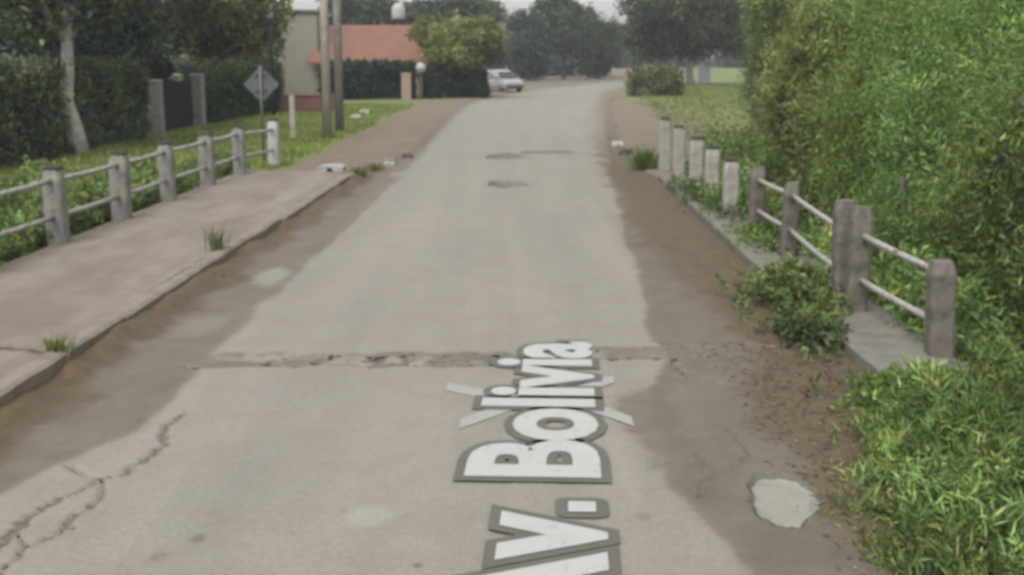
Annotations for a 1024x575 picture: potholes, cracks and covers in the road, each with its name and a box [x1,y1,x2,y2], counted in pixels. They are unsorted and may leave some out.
crack [0,414,187,575]
crack [164,352,514,369]
